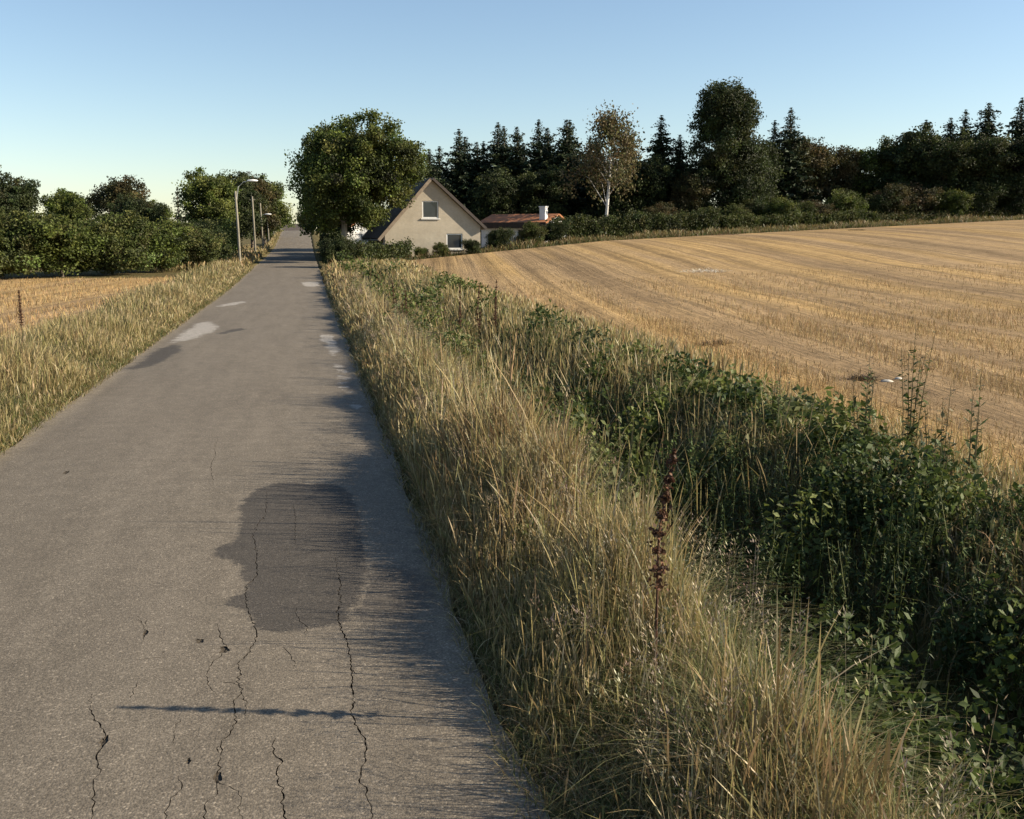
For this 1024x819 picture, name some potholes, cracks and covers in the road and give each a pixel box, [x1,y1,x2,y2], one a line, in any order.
crack [88,694,109,819]
crack [203,496,267,819]
crack [272,738,287,819]
crack [335,558,373,819]
